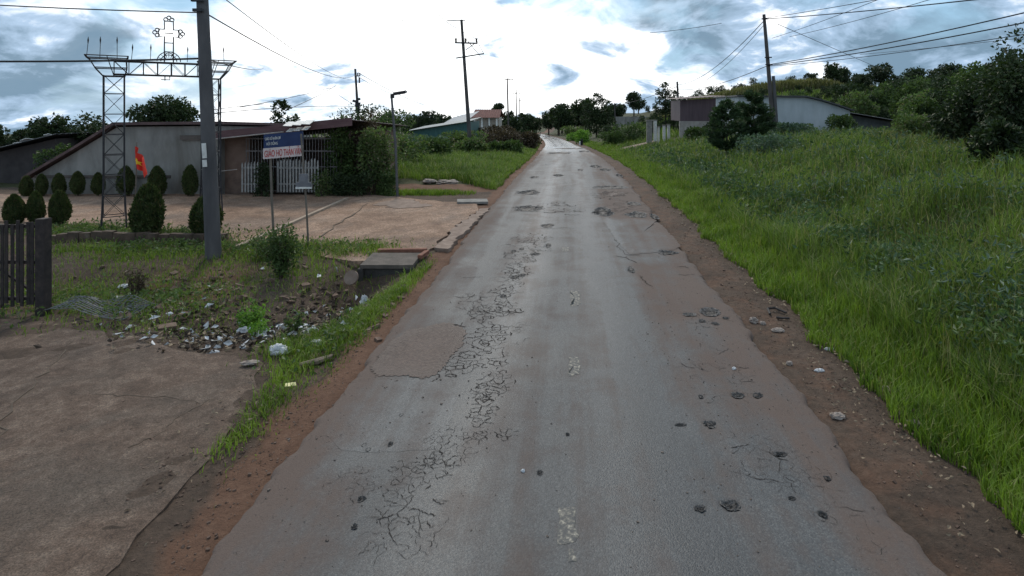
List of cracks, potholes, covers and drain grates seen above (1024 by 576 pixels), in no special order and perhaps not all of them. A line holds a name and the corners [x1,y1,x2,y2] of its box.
pothole [699,307,721,317]
pothole [591,207,615,216]
crack [727,437,886,554]
pothole [720,500,741,511]
crack [323,192,655,563]
